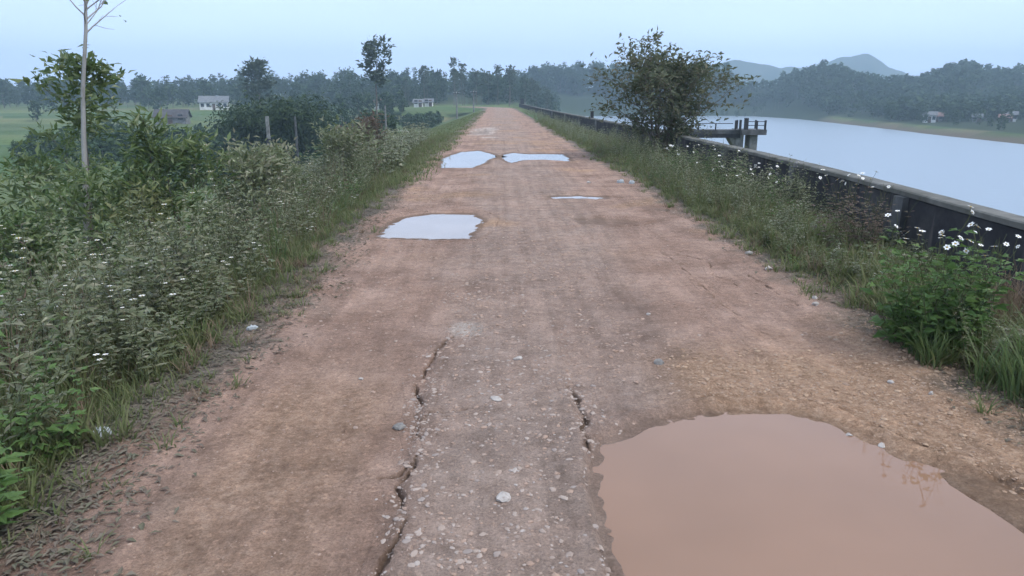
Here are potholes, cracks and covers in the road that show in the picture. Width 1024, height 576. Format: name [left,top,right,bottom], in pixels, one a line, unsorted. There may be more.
pothole [494,152,582,164]
pothole [557,395,1024,576]
crack [542,379,601,449]
pothole [536,193,622,201]
crack [358,328,484,576]
pothole [428,150,506,170]
pothole [358,210,499,243]
